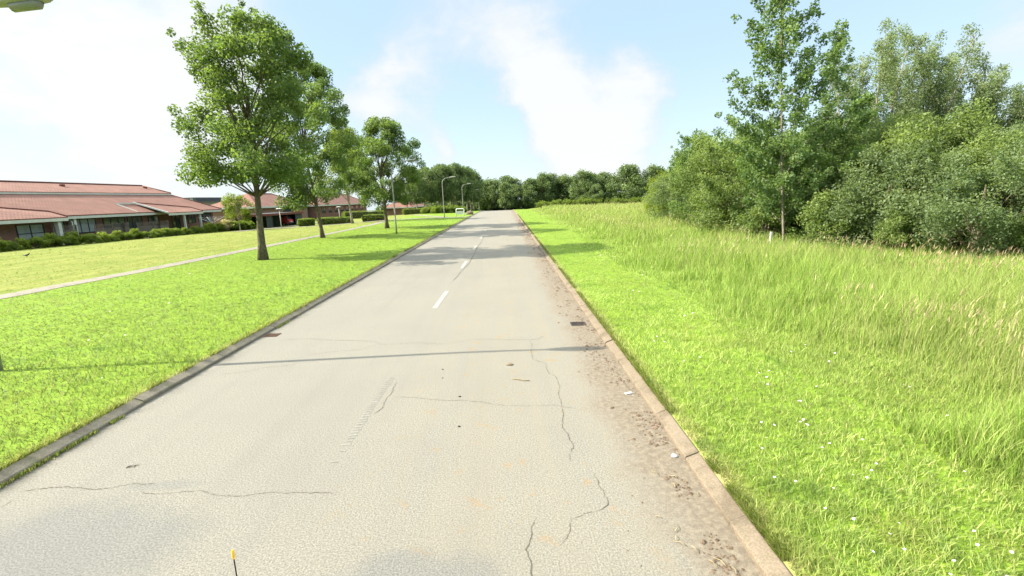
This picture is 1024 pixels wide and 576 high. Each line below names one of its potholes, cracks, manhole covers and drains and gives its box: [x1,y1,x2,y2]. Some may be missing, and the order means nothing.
crack [289,336,574,453]
crack [7,483,333,504]
